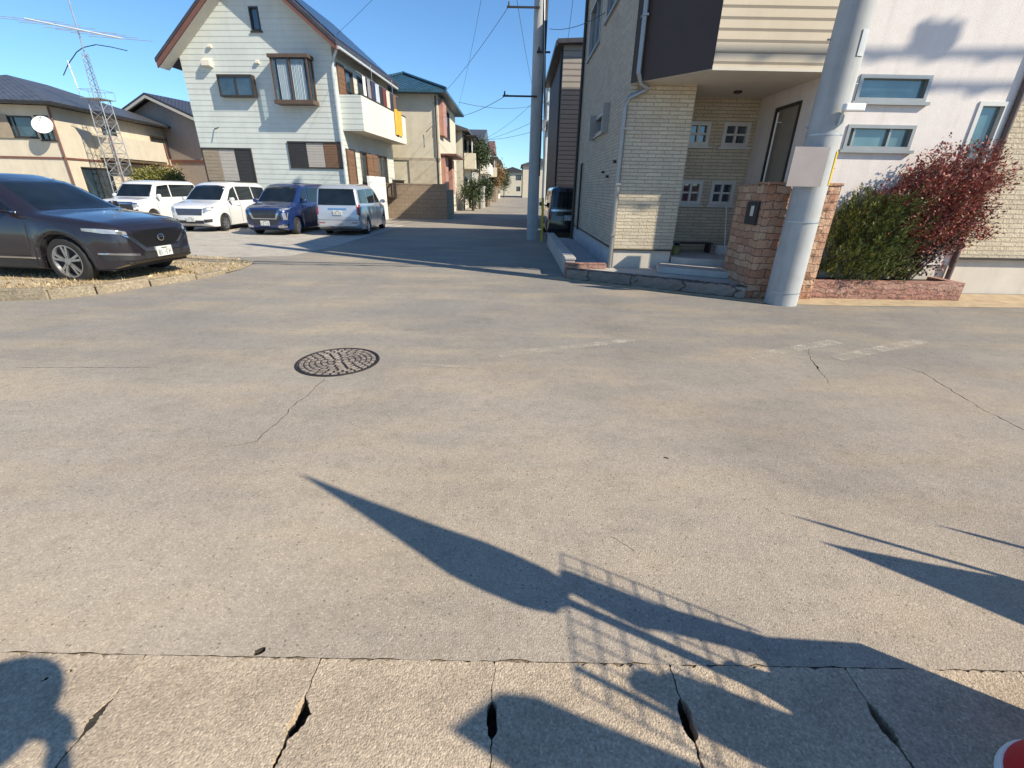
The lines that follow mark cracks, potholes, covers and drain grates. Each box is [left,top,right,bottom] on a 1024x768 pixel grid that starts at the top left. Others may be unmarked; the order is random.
manhole cover [294,348,380,377]
